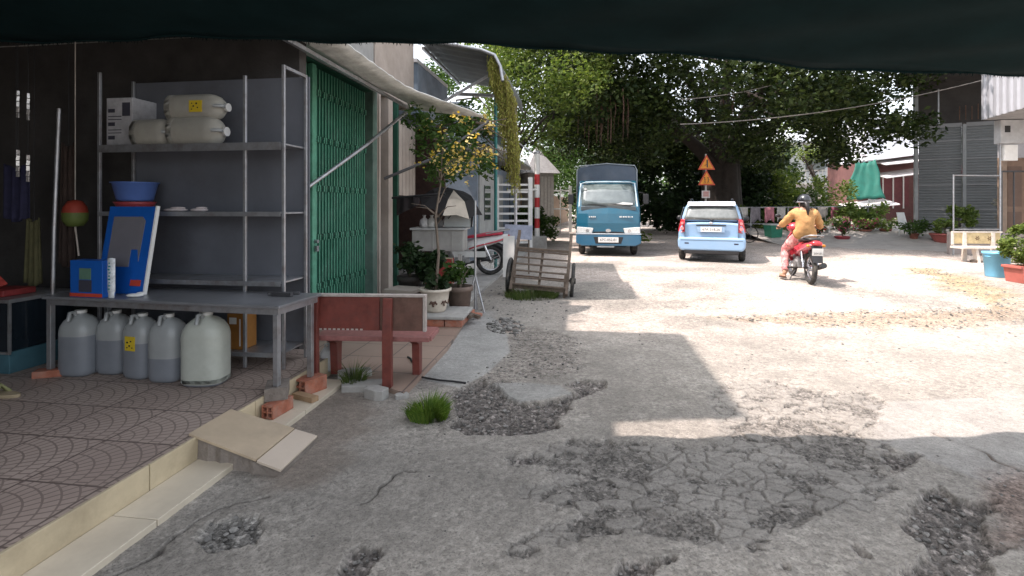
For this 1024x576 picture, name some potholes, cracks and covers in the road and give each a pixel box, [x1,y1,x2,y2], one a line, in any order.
pothole [333,544,389,576]
pothole [190,510,267,554]
pothole [885,483,1020,576]
pothole [444,378,609,437]
crack [355,468,420,507]
crack [497,379,906,562]
